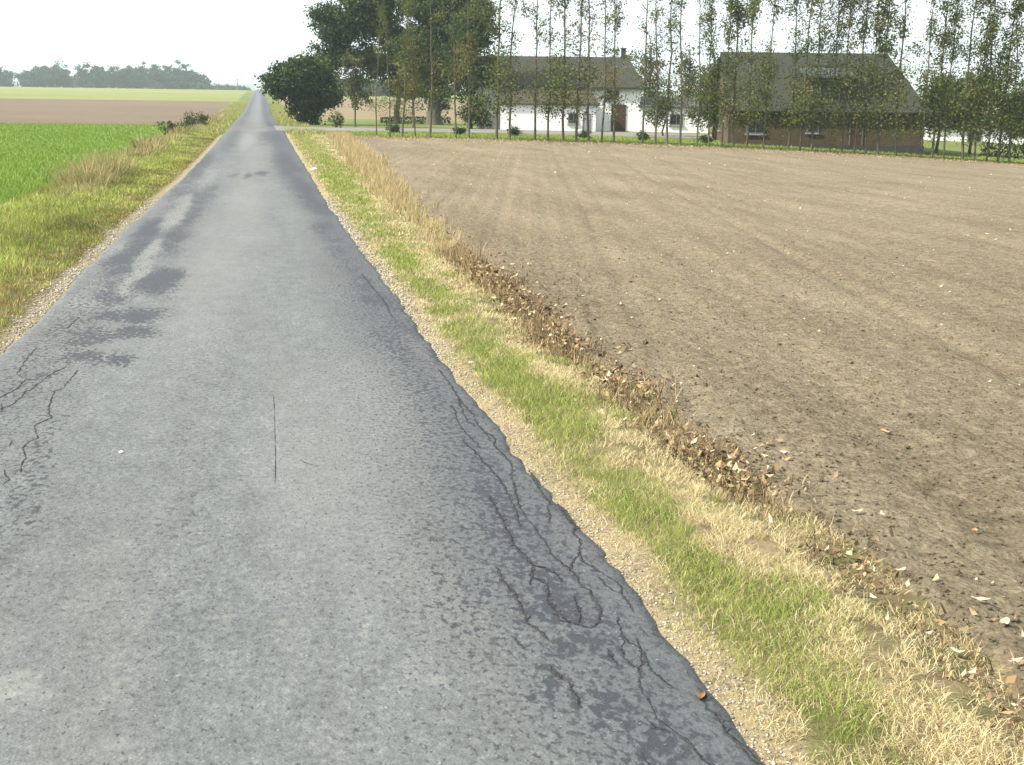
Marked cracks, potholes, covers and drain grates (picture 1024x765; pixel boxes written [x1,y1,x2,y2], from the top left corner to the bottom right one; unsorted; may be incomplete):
crack [0,348,78,484]
crack [438,369,765,765]
